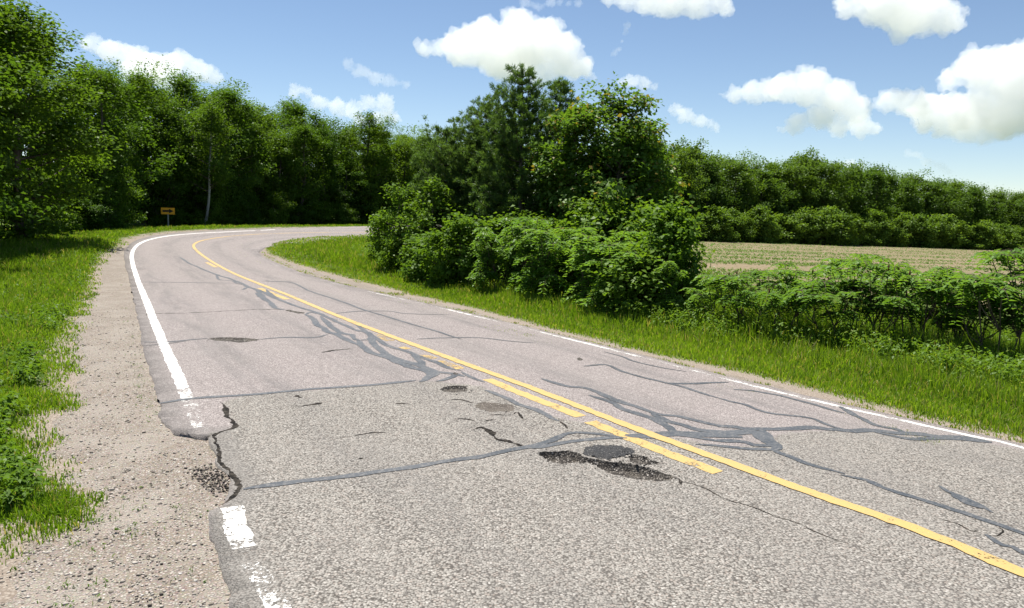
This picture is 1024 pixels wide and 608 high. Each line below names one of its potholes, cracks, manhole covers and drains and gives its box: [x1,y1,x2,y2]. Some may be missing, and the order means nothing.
crack [682,481,845,543]
pothole [538,450,675,481]
crack [452,399,528,446]
pothole [441,385,468,393]
crack [212,402,243,506]
